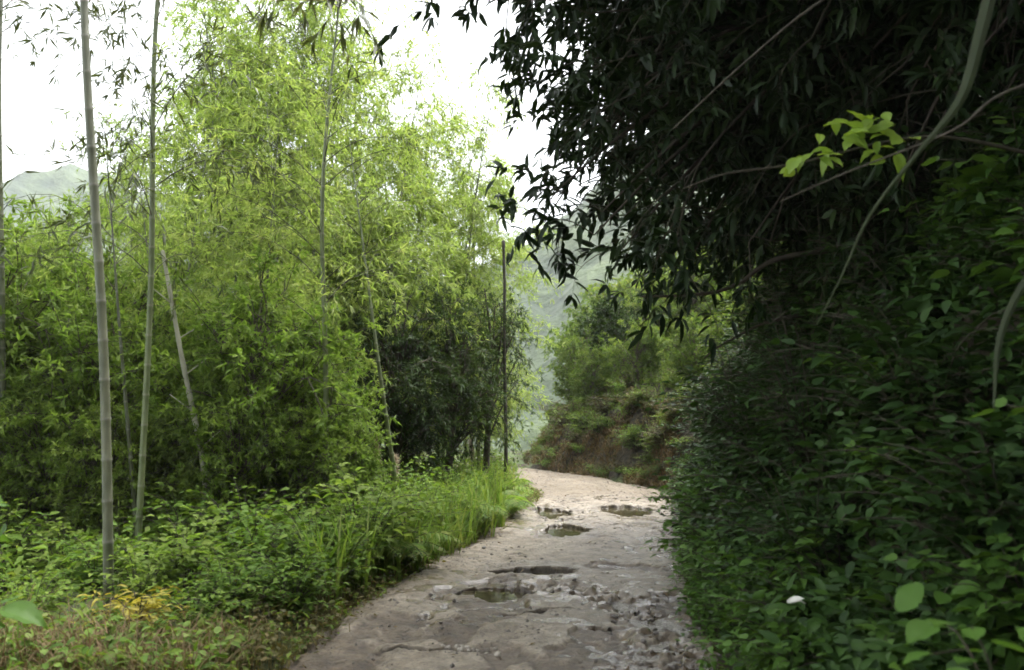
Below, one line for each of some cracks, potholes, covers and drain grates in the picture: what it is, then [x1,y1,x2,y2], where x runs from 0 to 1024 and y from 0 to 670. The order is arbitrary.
pothole [594,503,658,518]
crack [596,621,711,656]
pothole [535,522,599,538]
pothole [445,584,543,604]
crack [379,643,492,656]
crack [505,606,571,617]
pothole [478,566,589,577]
pothole [524,506,580,520]
